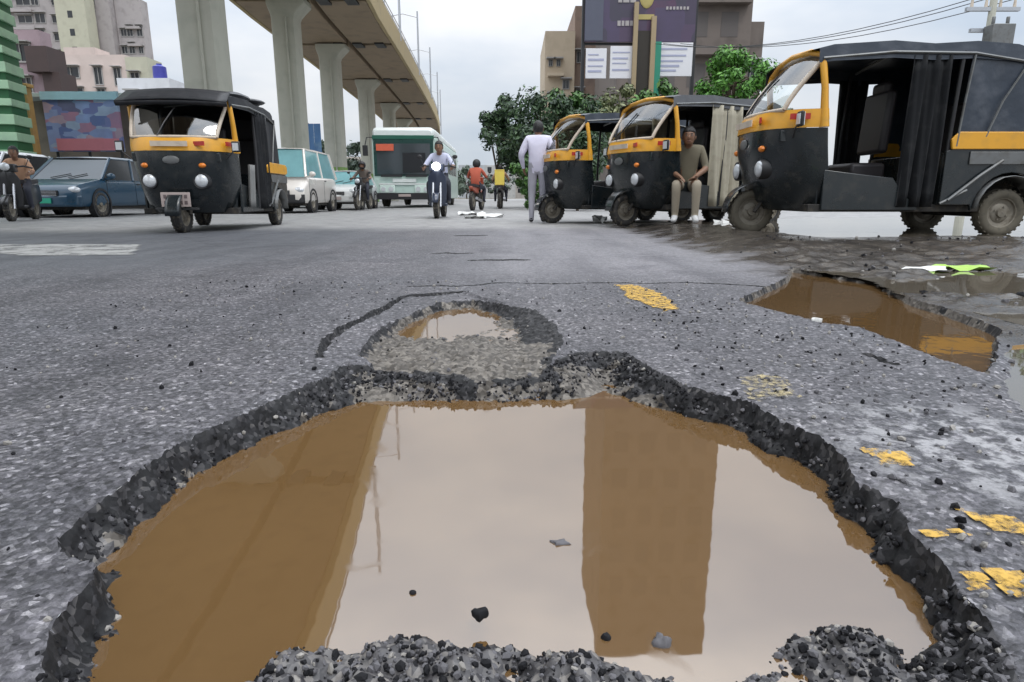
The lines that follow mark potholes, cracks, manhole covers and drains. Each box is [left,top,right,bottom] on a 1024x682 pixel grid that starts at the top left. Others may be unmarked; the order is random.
pothole [41,350,1019,682]
pothole [739,267,1002,375]
pothole [358,300,564,383]
crack [315,282,766,358]
